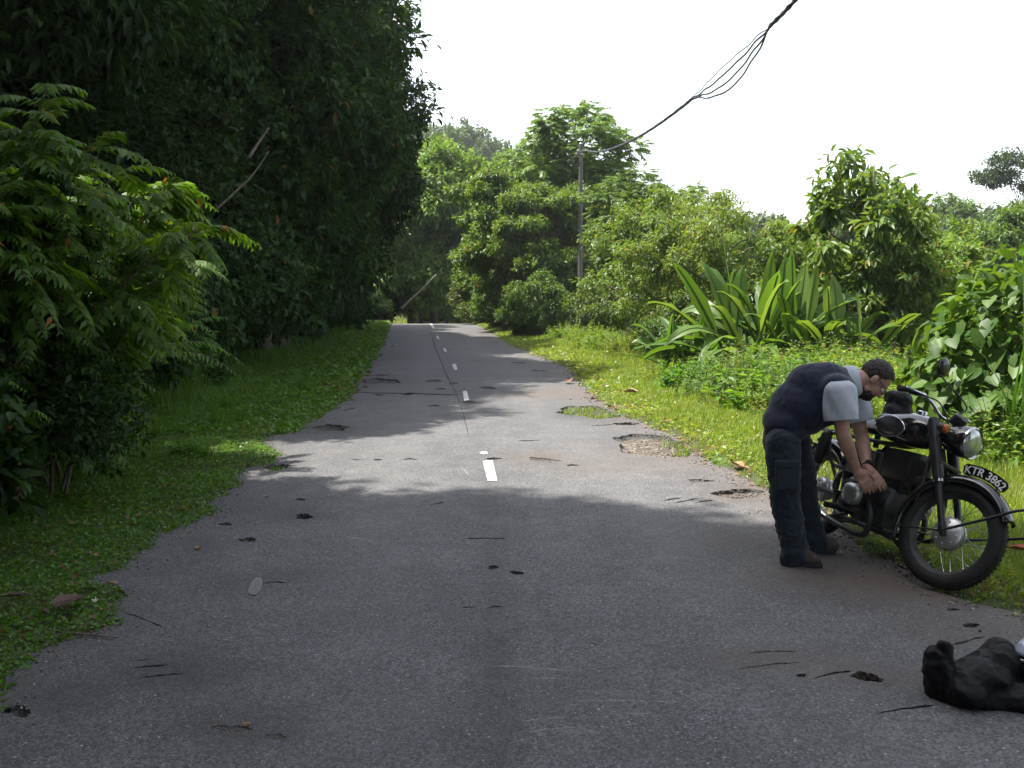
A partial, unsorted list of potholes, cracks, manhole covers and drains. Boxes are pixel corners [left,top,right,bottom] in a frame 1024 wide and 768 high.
pothole [849,671,884,682]
pothole [0,705,31,718]
crack [736,650,851,679]
pothole [612,434,700,458]
crack [878,705,935,714]
pothole [710,489,765,499]
crack [133,659,186,678]
pothole [556,403,621,419]
